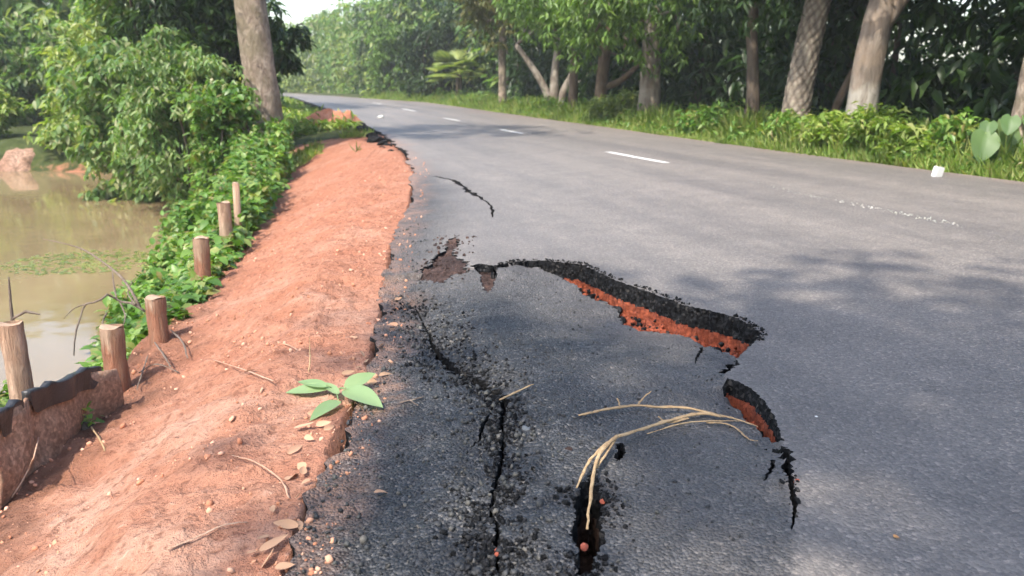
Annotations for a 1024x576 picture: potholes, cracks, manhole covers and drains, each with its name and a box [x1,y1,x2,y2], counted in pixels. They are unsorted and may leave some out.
crack [435,176,495,218]
pothole [417,236,470,283]
crack [415,260,798,574]
